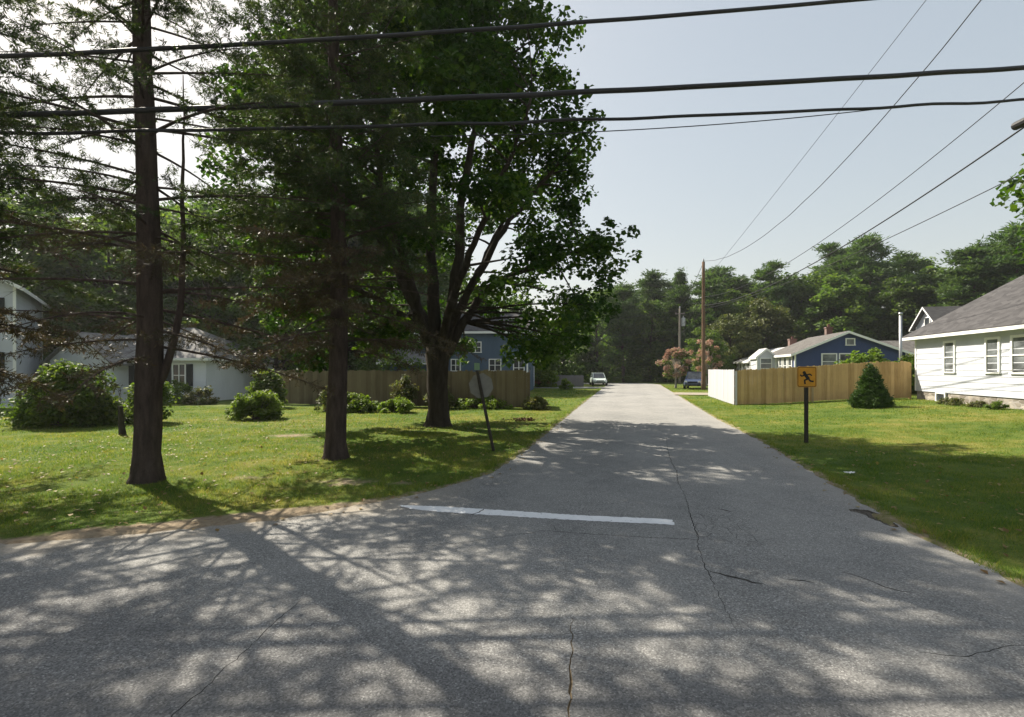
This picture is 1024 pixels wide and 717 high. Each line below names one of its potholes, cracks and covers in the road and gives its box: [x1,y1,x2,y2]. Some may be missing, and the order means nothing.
crack [918,645,1013,657]
crack [171,600,301,717]
pothole [849,509,899,527]
